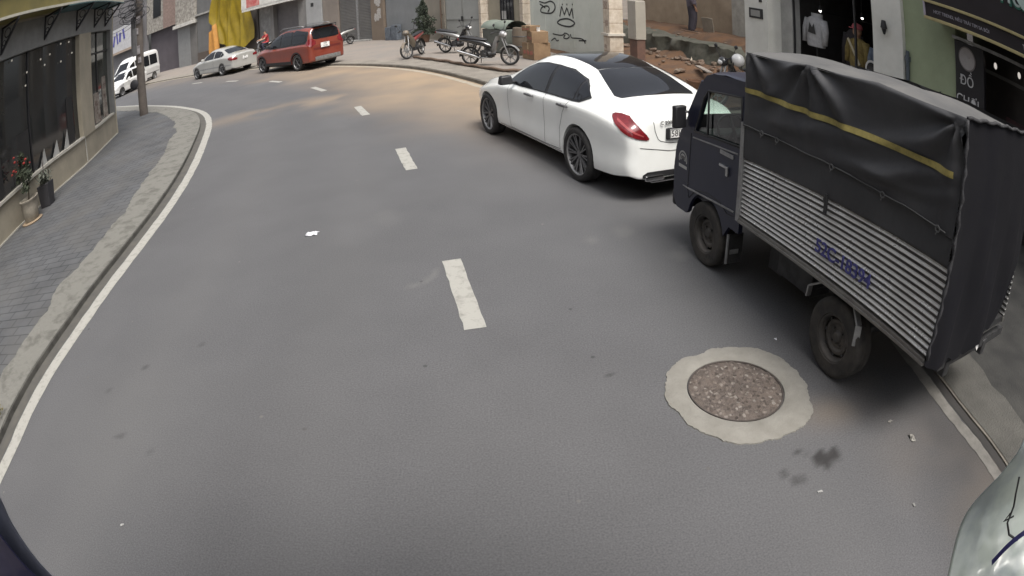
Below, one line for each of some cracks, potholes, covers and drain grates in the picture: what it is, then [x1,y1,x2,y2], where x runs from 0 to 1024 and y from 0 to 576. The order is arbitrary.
manhole cover [664,347,813,445]
